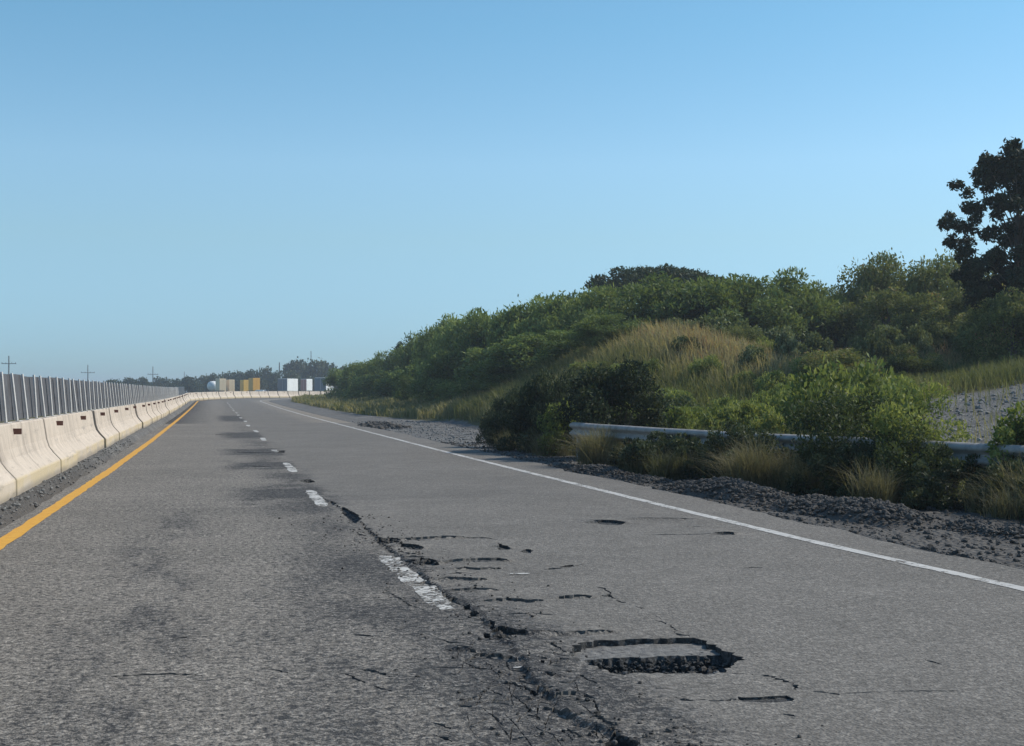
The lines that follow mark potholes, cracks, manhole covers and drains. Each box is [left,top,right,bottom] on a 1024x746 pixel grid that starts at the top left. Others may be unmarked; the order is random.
pothole [569,638,744,675]
crack [324,499,689,746]
pothole [340,507,362,523]
crack [734,673,934,695]
